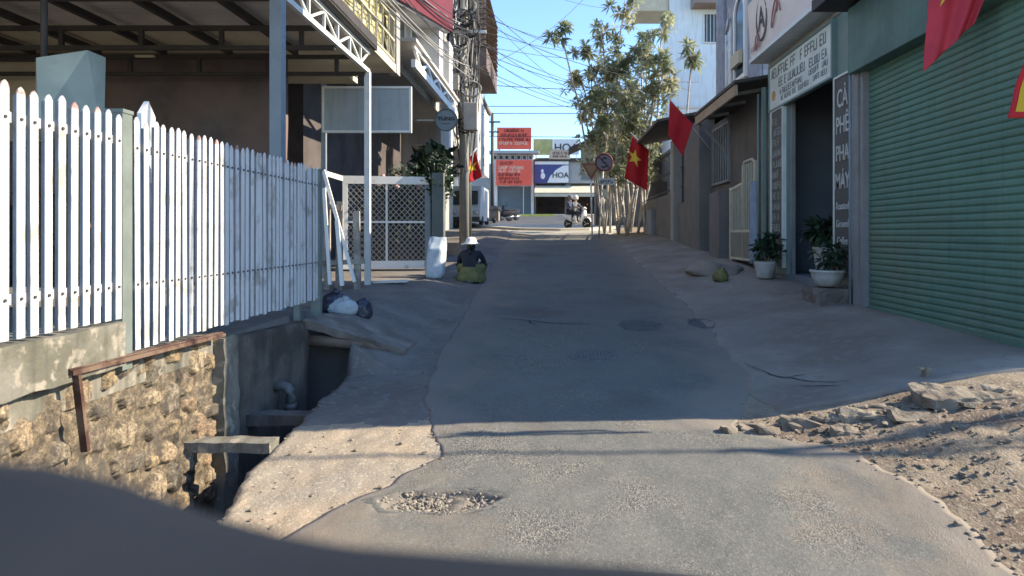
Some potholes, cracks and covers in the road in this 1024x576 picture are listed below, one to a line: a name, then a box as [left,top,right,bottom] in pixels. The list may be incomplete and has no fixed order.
crack [749,365,849,386]
pothole [362,488,515,516]
